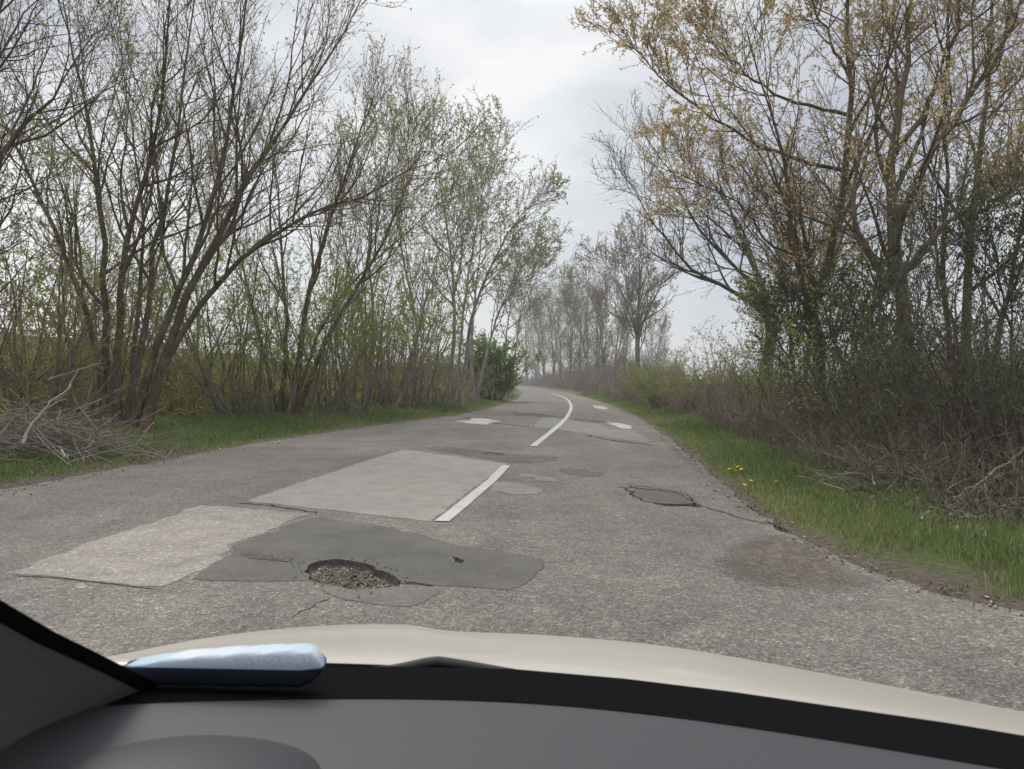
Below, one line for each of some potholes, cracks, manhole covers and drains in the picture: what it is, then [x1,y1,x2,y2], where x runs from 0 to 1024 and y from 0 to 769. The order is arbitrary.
pothole [286,551,418,598]
crack [618,484,787,533]
